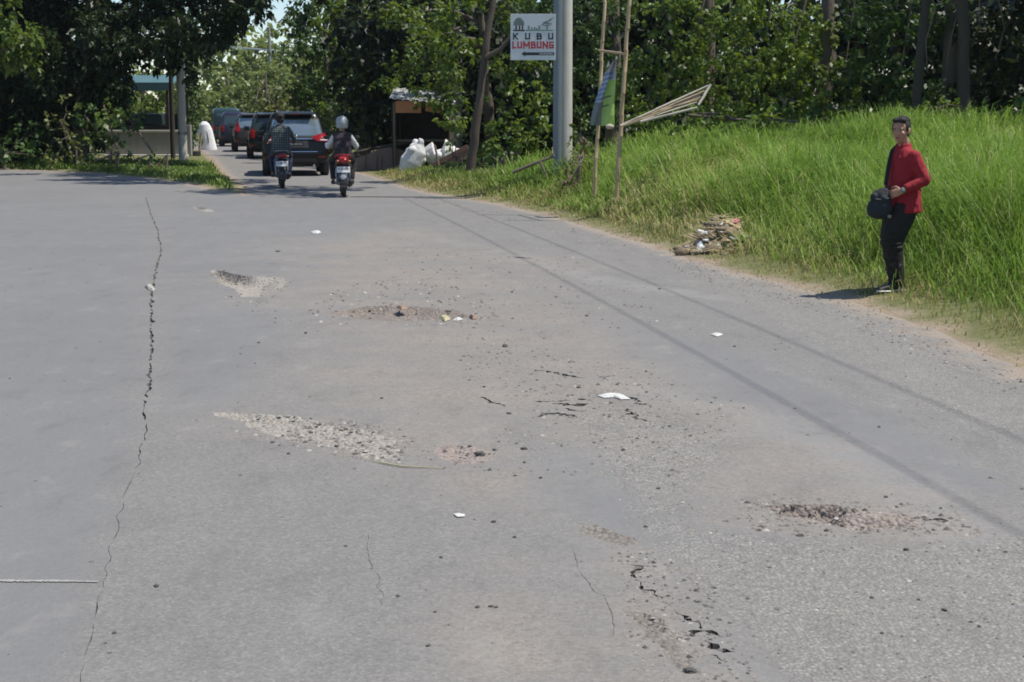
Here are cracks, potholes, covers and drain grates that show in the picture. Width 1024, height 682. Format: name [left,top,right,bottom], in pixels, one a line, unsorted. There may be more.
crack [573,551,617,633]
crack [538,370,609,378]
pothole [329,306,469,322]
pothole [761,504,919,530]
crack [340,536,384,621]
pothole [433,444,494,464]
pothole [208,270,287,297]
crack [80,198,162,682]
pothole [213,412,403,460]
crack [536,398,588,418]
crack [628,564,734,661]
crack [625,397,647,421]
